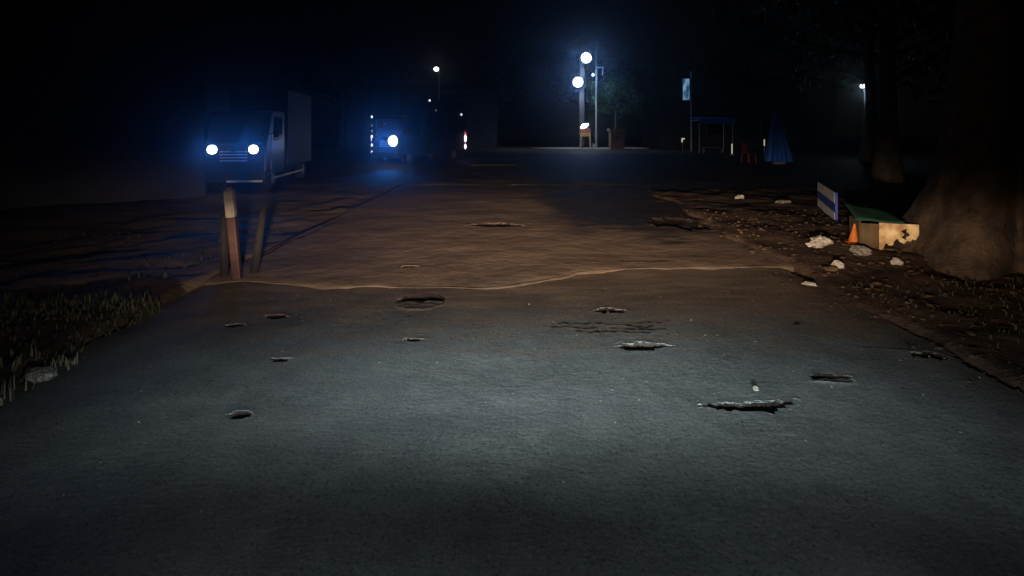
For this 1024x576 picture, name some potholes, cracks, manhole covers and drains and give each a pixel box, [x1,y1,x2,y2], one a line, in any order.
pothole [609,339,681,354]
pothole [798,369,863,387]
pothole [258,313,294,321]
pothole [388,291,453,311]
pothole [220,407,260,424]
pothole [588,306,633,315]
pothole [641,215,721,232]
crack [550,320,673,335]
pothole [262,355,300,364]
pothole [901,349,958,363]
pothole [669,396,808,417]
